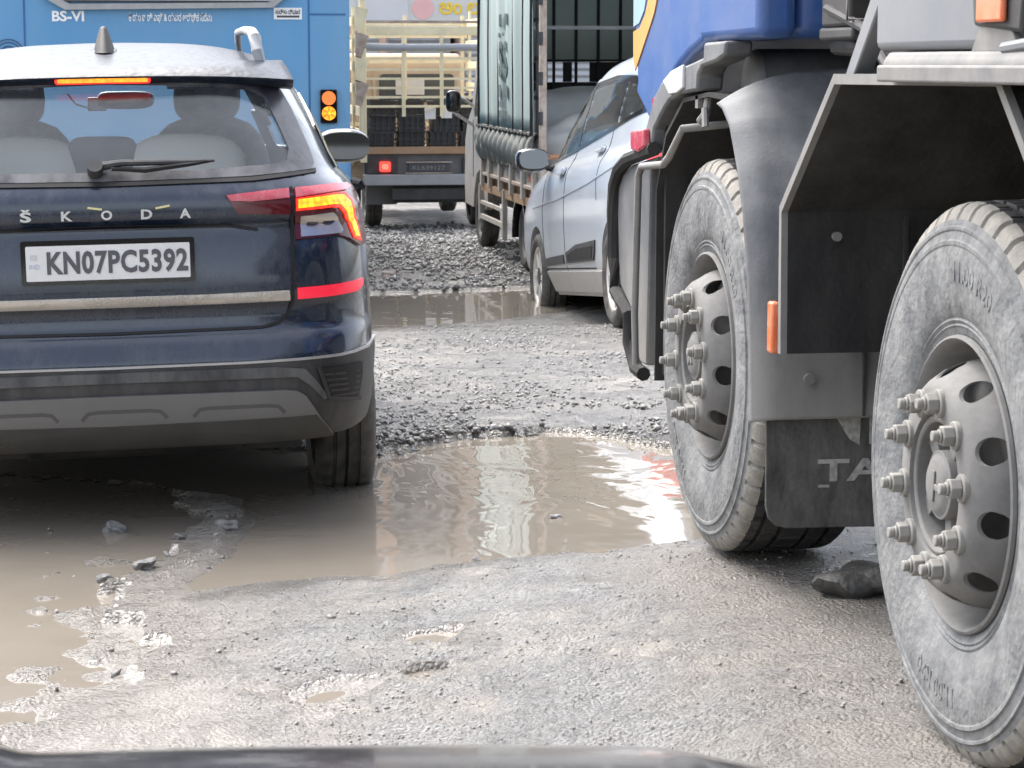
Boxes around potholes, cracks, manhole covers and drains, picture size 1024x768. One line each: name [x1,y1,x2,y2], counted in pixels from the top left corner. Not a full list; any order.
pothole [405,625,461,643]
pothole [373,285,603,297]
pothole [0,491,213,724]
pothole [0,426,672,595]
pothole [407,660,456,676]
